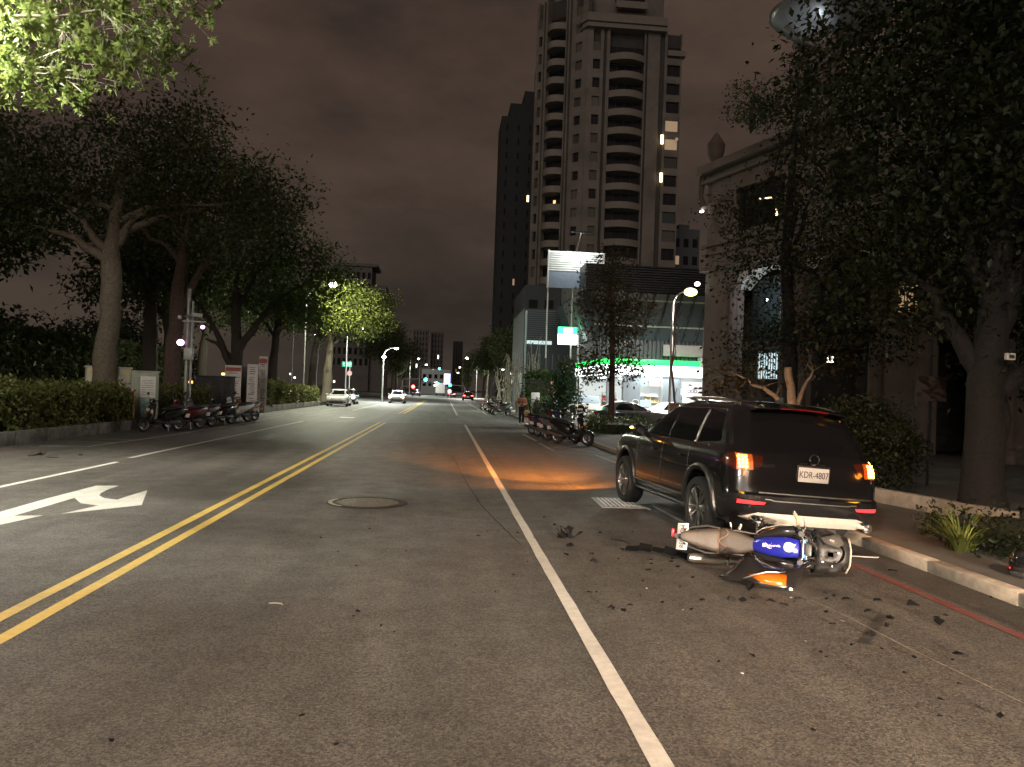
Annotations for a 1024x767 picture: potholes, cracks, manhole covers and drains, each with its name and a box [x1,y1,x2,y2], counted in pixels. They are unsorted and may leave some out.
crack [452,457,522,546]
manhole cover [327,497,408,509]
crack [793,591,1023,703]
